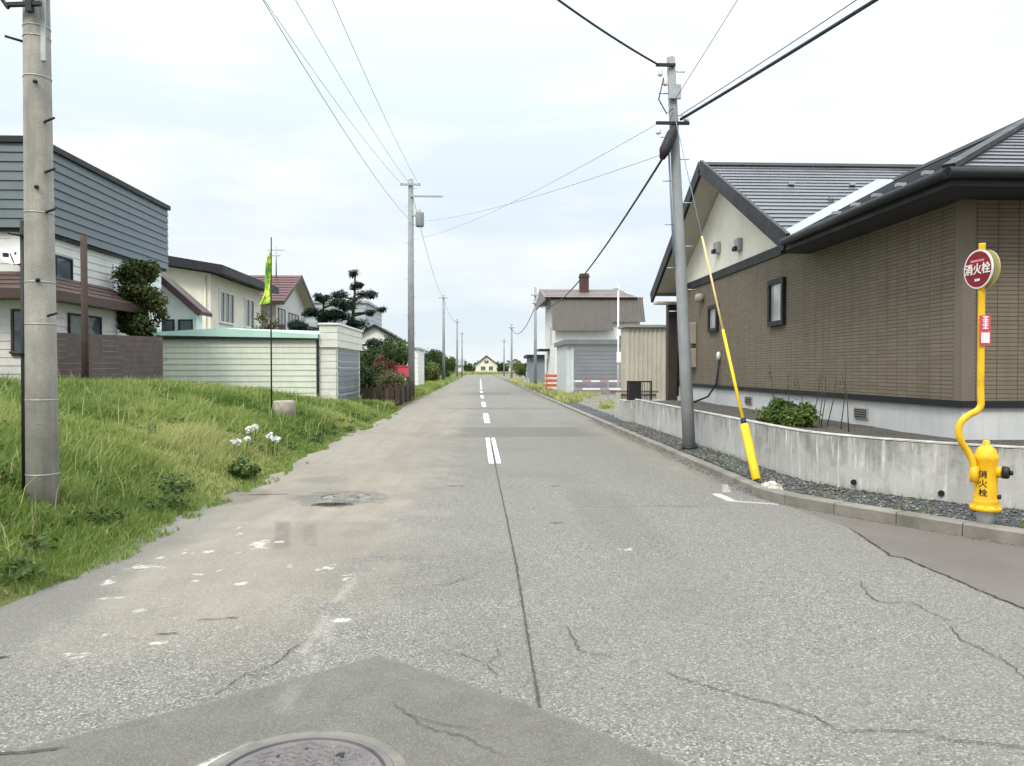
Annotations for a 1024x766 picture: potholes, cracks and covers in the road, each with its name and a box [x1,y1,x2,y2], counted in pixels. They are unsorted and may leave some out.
crack [393,698,502,754]
crack [861,581,1024,677]
manhole cover [315,493,376,503]
manhole cover [207,731,408,766]
crack [665,670,1024,747]
crack [207,641,303,698]
